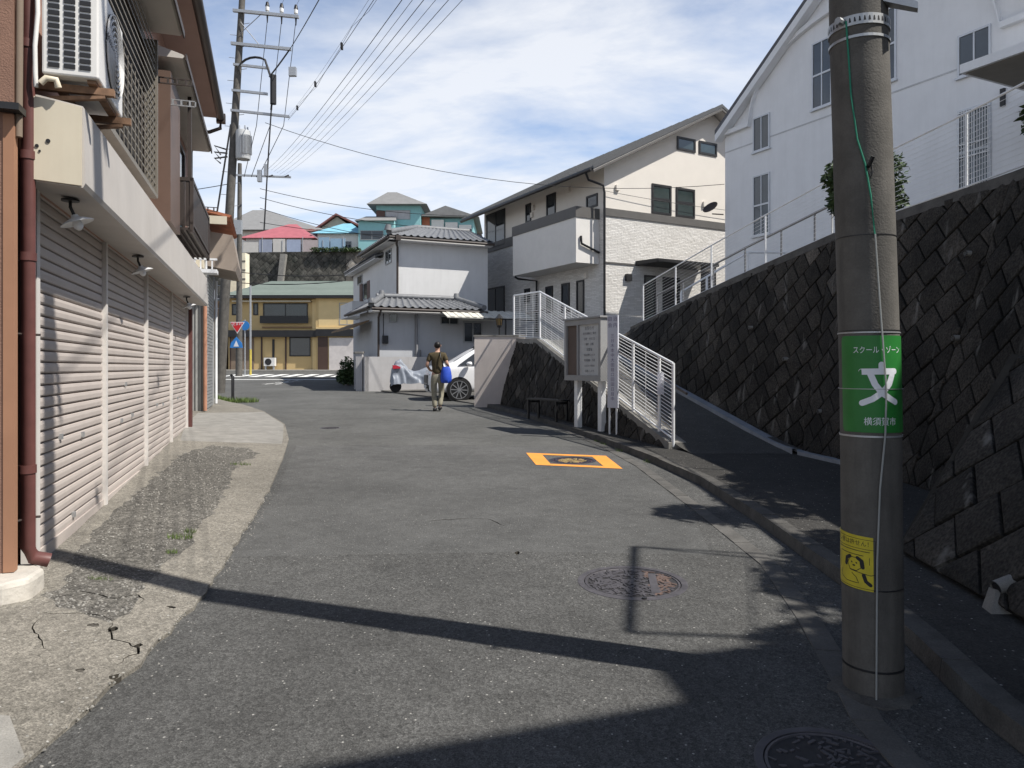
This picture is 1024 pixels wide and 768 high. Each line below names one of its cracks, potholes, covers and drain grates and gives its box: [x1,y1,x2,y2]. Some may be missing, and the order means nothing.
crack [32,591,144,665]
manhole cover [578,566,688,601]
manhole cover [754,727,894,768]
